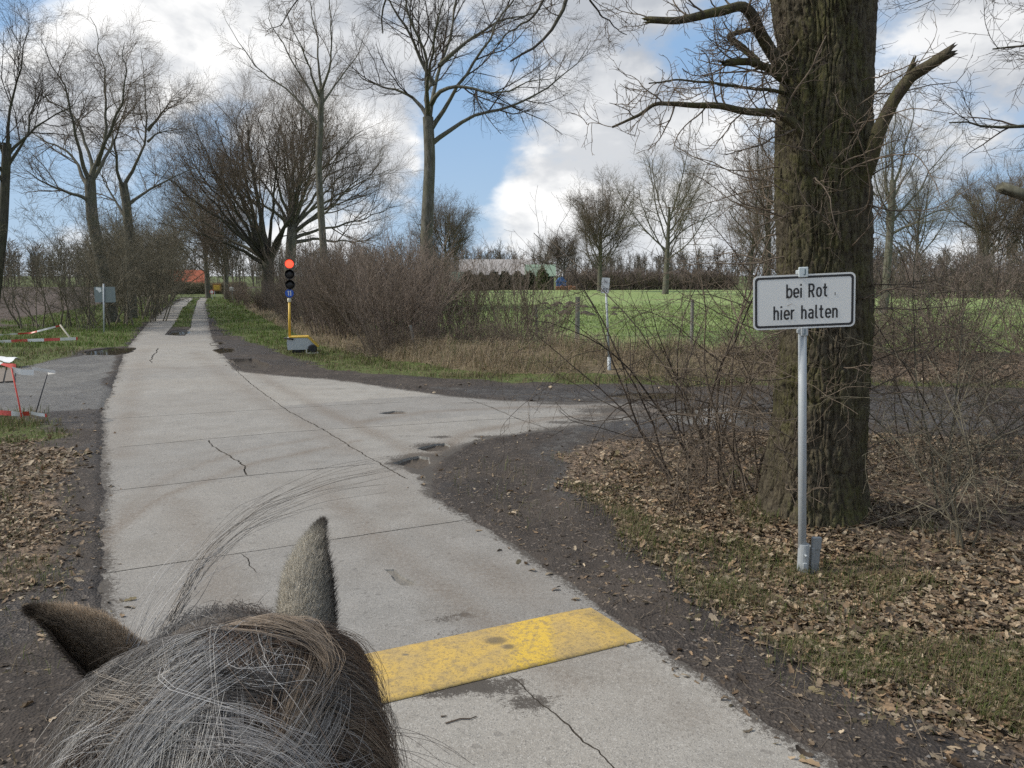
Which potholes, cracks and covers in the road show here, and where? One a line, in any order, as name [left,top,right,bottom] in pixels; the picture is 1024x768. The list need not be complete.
pothole [384,569,415,586]
crack [510,676,615,768]
pothole [417,443,450,452]
crack [208,440,247,475]
pothole [393,456,430,469]
